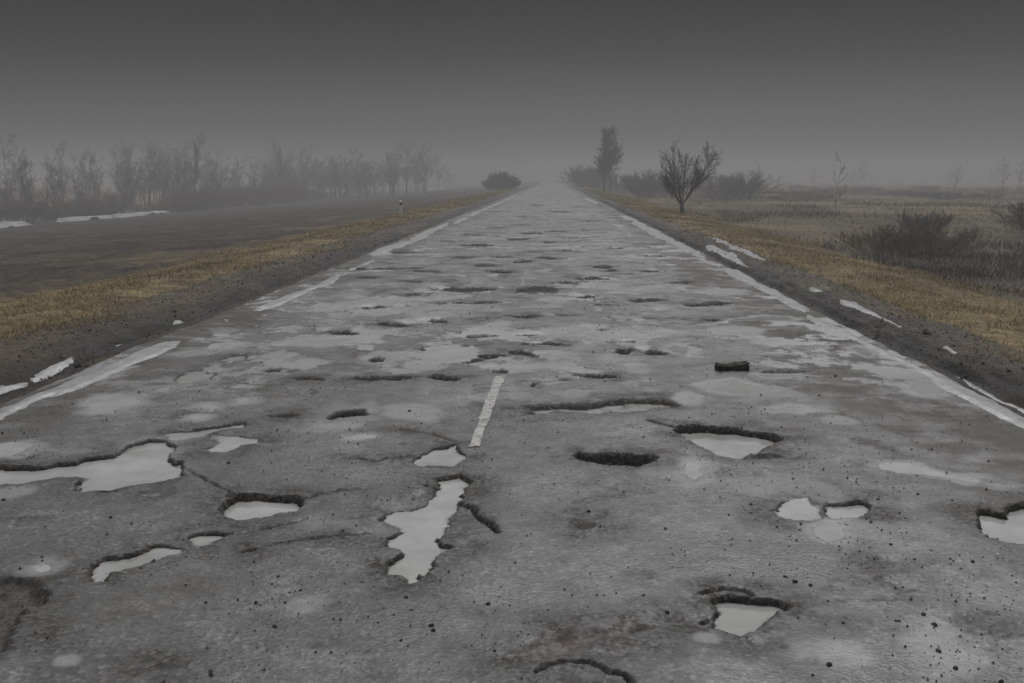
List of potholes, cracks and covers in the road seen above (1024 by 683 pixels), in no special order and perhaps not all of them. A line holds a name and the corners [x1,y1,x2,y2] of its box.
pothole [0,436,194,493]
pothole [200,432,272,455]
pothole [206,490,316,523]
pothole [664,421,802,461]
pothole [399,442,478,470]
pothole [757,493,826,524]
pothole [364,472,482,592]
pothole [72,537,201,587]
pothole [693,590,810,642]
crack [457,500,511,536]
pothole [171,526,241,549]
crack [520,654,650,683]
